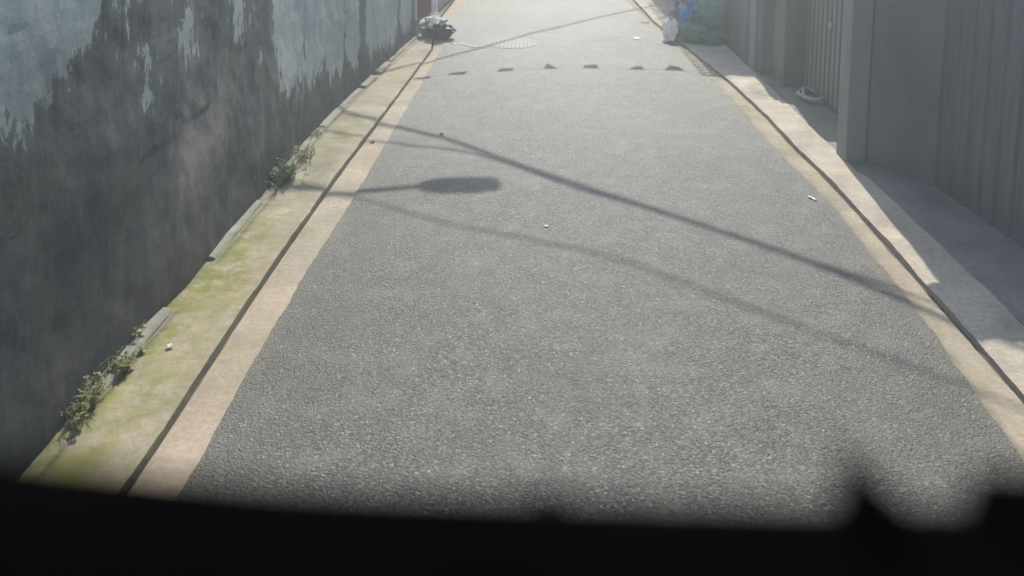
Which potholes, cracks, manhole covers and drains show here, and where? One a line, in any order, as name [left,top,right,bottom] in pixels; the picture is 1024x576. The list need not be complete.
manhole cover [487,38,537,49]
